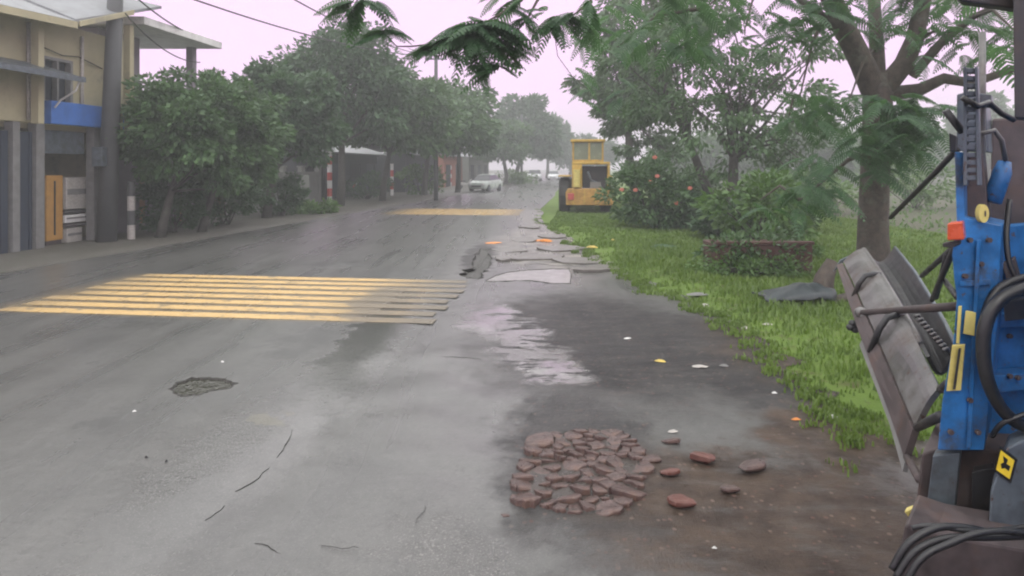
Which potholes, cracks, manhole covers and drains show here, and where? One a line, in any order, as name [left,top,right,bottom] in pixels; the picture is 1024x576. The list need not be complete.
pothole [459,249,492,279]
pothole [168,377,238,397]
